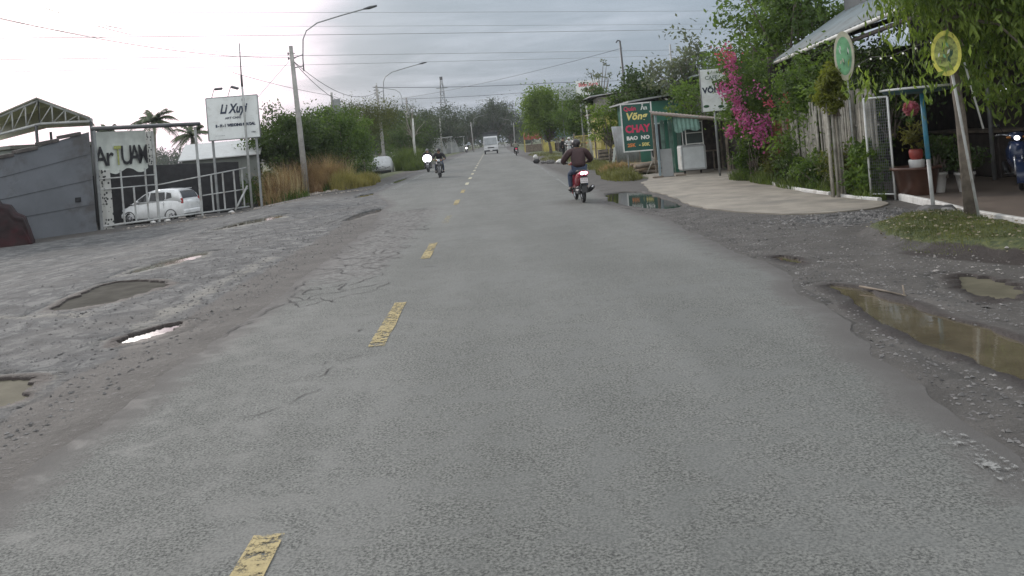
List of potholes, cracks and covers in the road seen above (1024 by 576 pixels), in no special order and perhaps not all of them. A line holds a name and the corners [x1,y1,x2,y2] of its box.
pothole [0,371,67,413]
pothole [332,208,384,224]
pothole [88,318,208,352]
pothole [604,191,691,212]
pothole [26,278,187,316]
pothole [800,281,1024,405]
pothole [930,272,1024,308]
pothole [203,214,292,233]
pothole [754,254,826,269]
crack [223,207,433,336]
